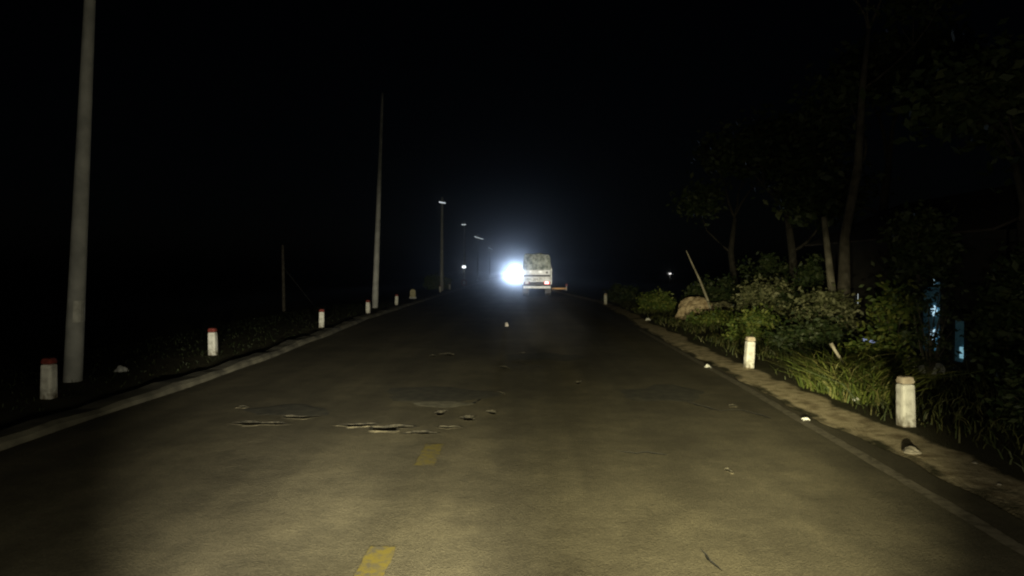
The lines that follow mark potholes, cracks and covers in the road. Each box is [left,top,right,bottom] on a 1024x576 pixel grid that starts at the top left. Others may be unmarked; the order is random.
pothole [365,423,420,433]
crack [701,549,722,571]
